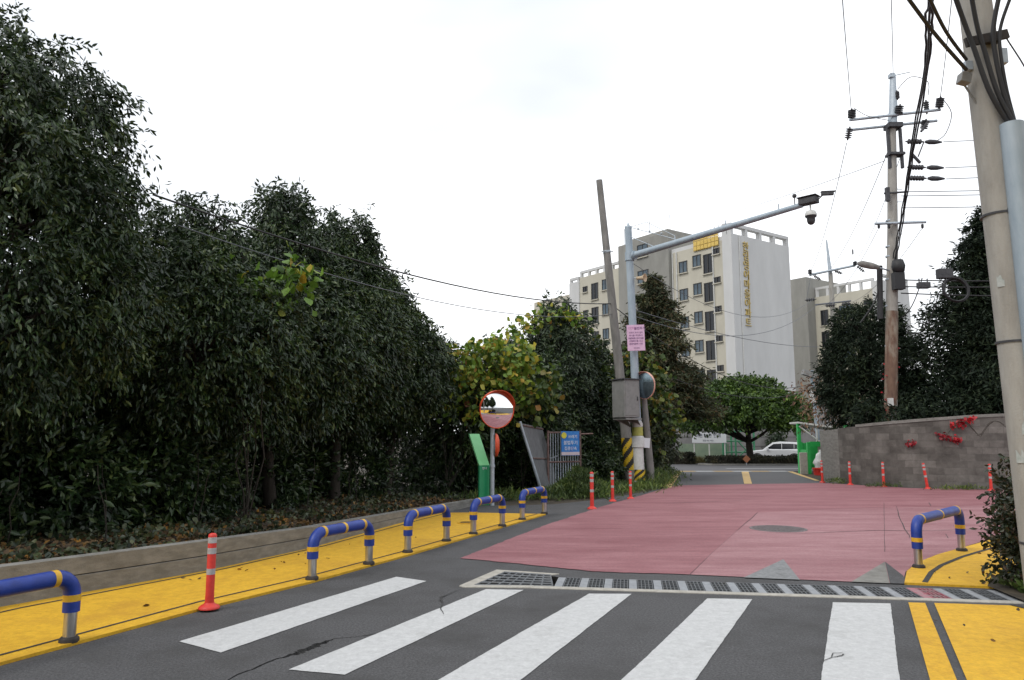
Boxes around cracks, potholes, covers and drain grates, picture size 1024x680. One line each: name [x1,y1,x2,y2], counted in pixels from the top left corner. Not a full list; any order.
crack [228,633,374,680]
crack [817,506,984,552]
